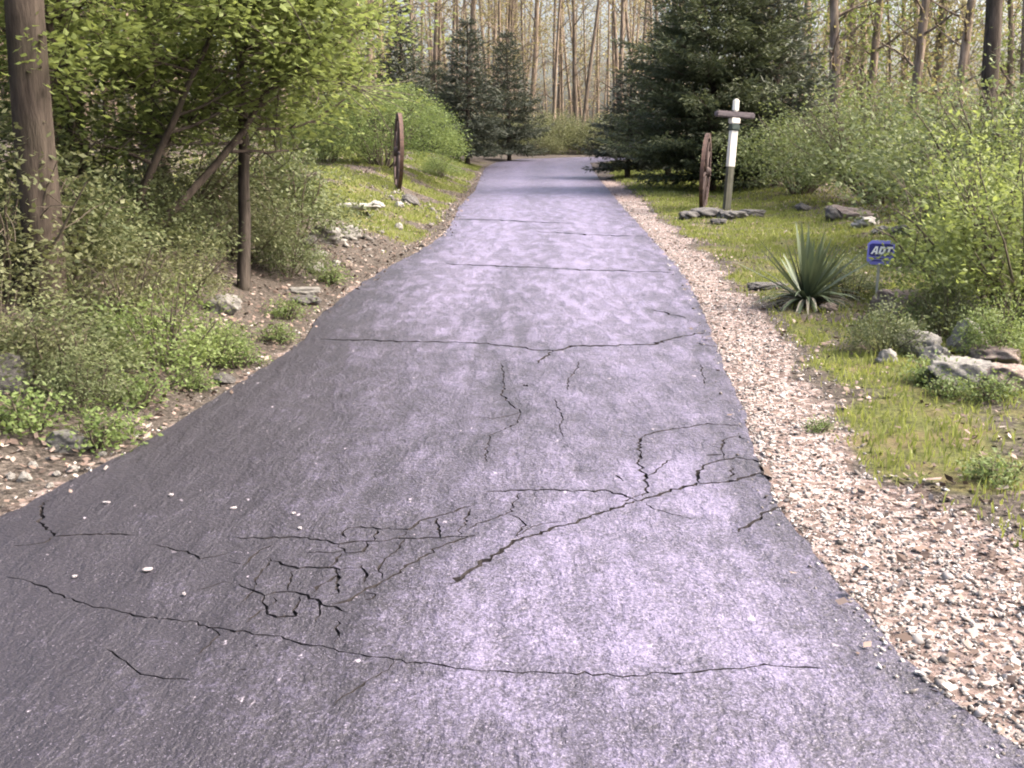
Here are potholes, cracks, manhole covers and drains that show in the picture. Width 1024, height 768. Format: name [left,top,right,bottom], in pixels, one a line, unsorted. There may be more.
crack [9,423,821,705]
crack [328,310,714,461]
crack [447,263,671,273]
